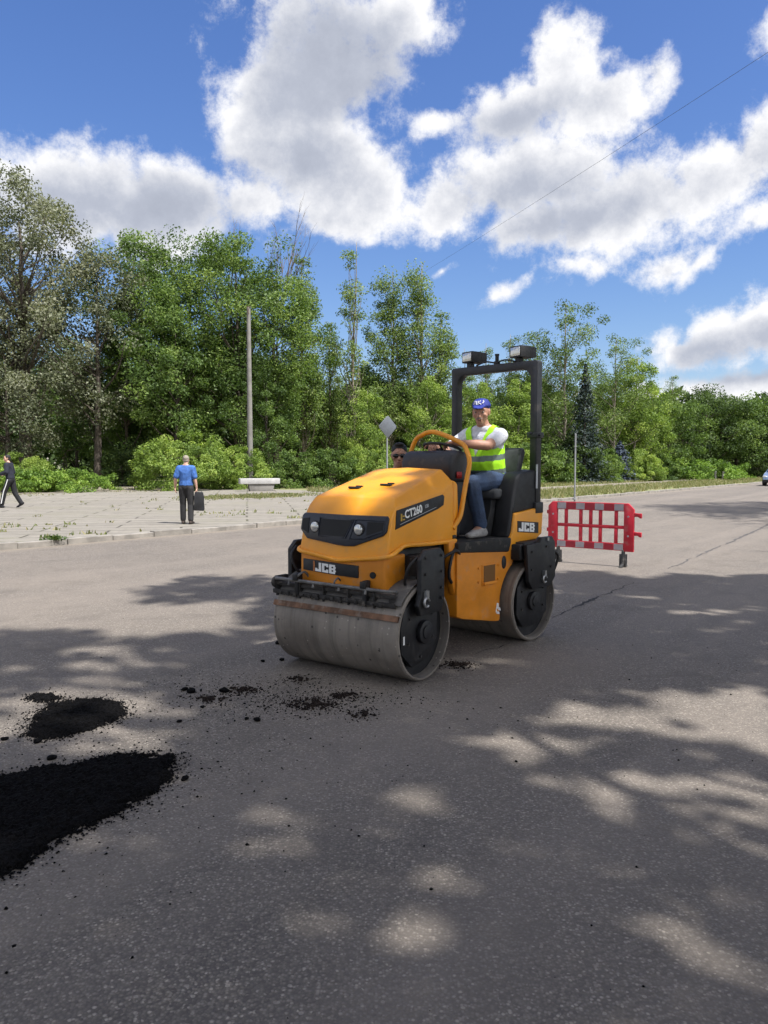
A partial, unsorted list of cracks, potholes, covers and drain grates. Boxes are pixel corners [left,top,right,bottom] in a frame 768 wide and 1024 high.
crack [554,582,634,617]
crack [668,524,768,569]
